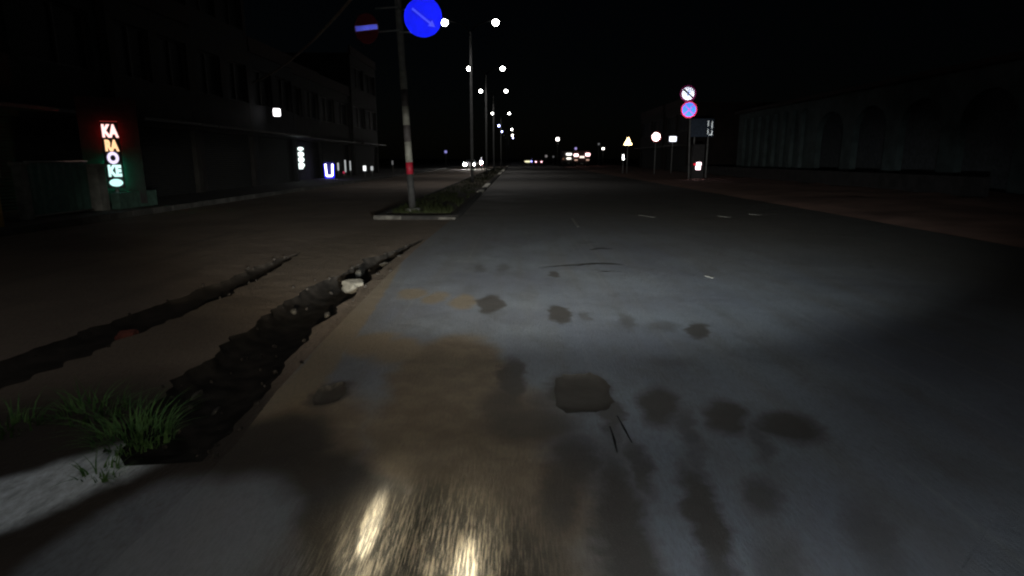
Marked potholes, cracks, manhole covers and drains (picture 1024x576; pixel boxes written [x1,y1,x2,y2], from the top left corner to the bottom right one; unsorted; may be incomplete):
pothole [118,239,423,466]
crack [538,242,626,272]
pothole [554,372,615,413]
pothole [0,252,301,389]
crack [609,415,632,453]
